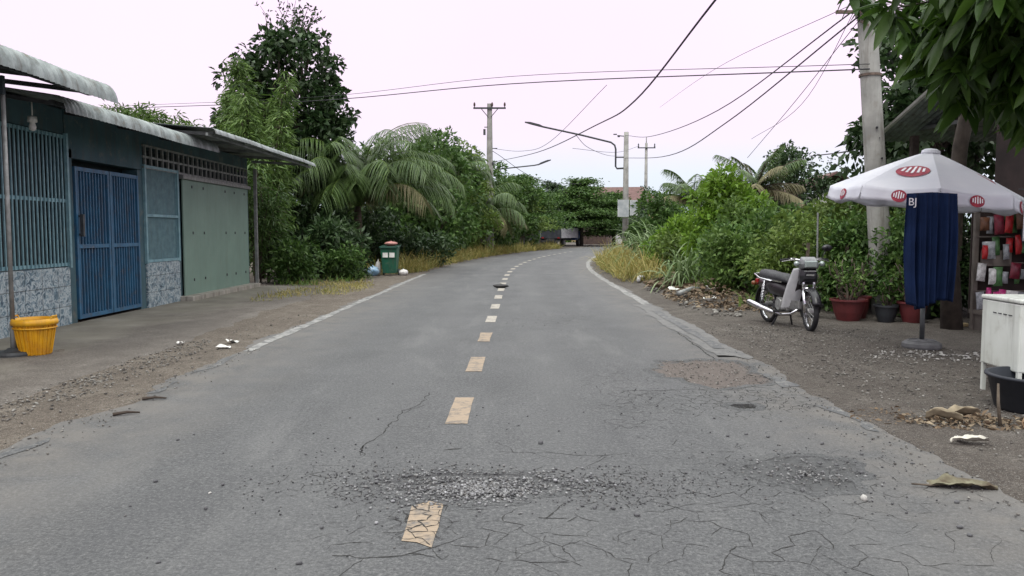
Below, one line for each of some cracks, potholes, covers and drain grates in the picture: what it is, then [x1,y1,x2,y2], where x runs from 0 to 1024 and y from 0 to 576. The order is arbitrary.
pothole [713,451,898,502]
pothole [305,462,644,524]
crack [577,365,831,465]
crack [248,393,1018,576]
pothole [719,402,766,411]
